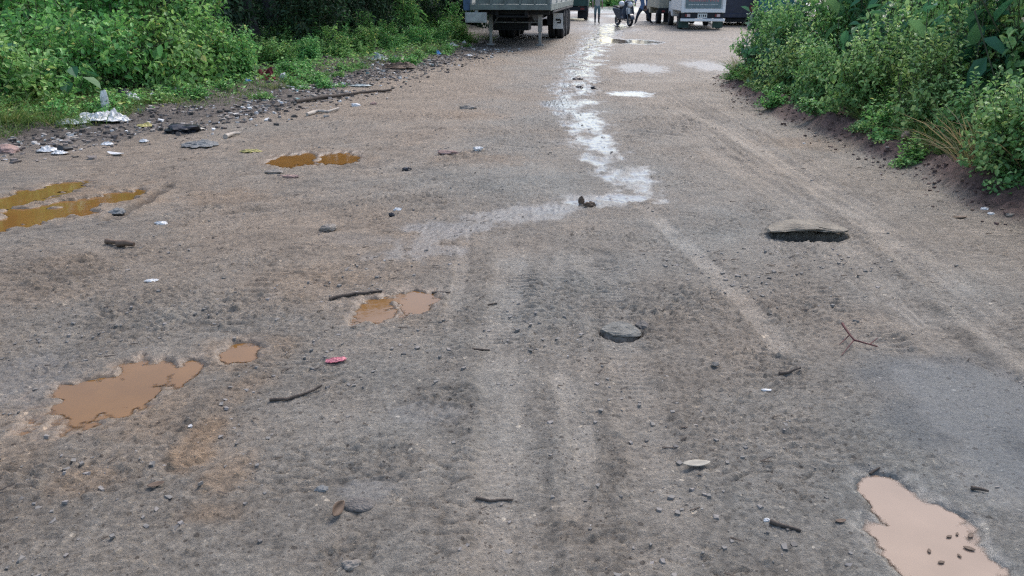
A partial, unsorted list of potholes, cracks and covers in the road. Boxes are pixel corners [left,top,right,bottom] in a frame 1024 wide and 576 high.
pothole [0,345,214,444]
pothole [257,149,367,170]
pothole [840,462,1024,576]
pothole [212,336,274,366]
pothole [334,281,444,337]
pothole [0,178,165,234]
